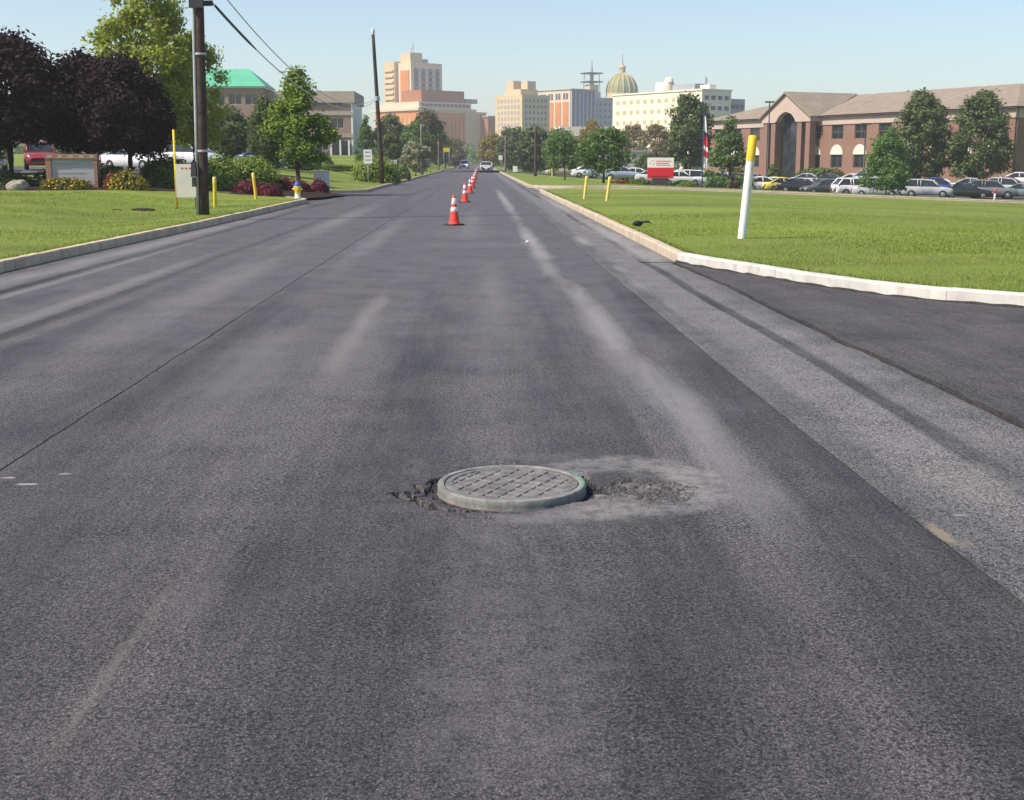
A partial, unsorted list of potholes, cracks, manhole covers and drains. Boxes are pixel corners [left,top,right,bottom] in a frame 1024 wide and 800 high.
pothole [603,476,699,509]
manhole cover [437,465,587,512]
